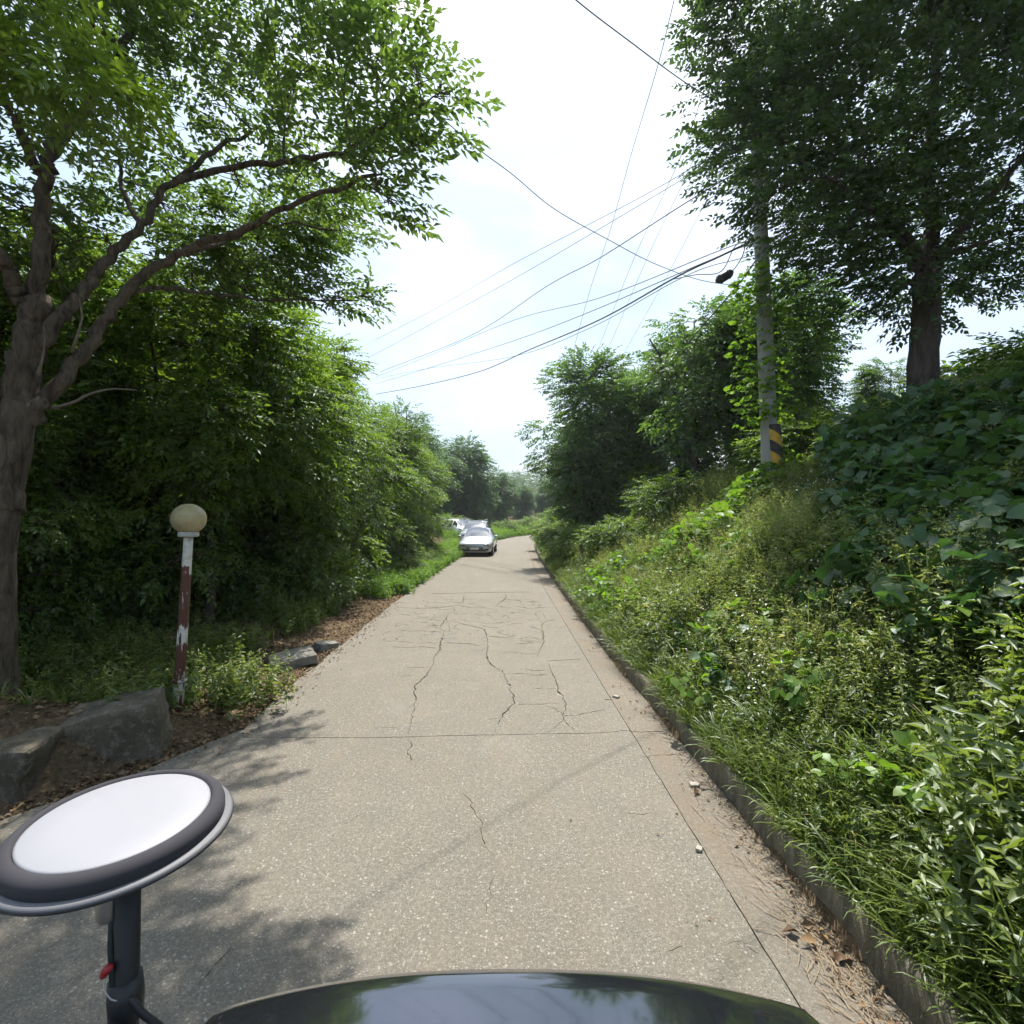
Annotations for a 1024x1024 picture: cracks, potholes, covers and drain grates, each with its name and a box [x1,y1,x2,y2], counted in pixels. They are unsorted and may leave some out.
crack [375,594,612,760]
